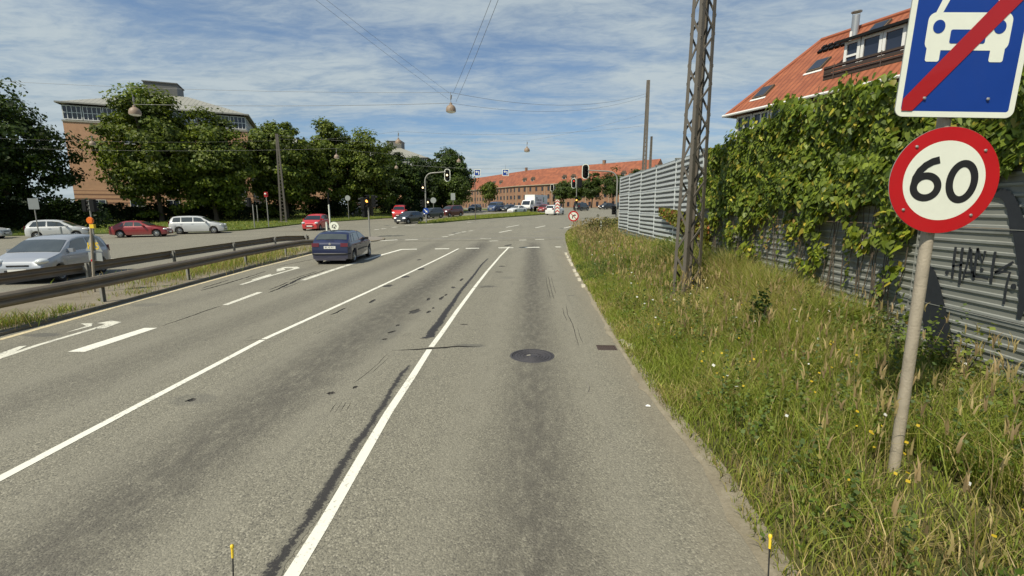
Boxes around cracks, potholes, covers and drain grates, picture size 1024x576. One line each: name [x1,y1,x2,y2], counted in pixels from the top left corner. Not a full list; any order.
crack [354,335,480,383]
manhole cover [510,349,554,363]
crack [546,276,583,343]
